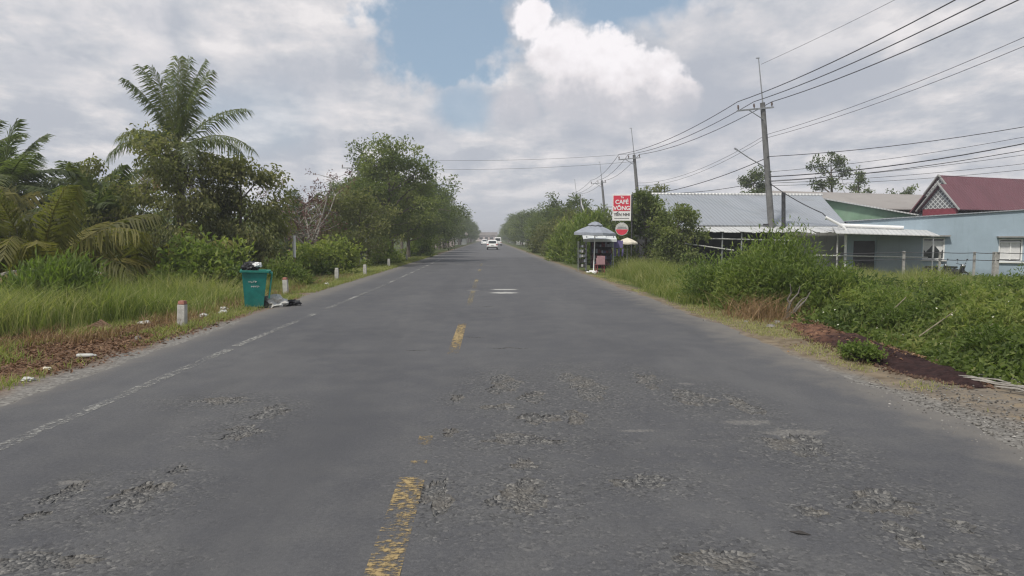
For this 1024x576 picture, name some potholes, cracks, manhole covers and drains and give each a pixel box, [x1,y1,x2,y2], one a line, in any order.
pothole [608,474,673,489]
pothole [761,433,831,458]
pothole [415,478,455,517]
pothole [218,424,267,441]
pothole [101,481,177,515]
pothole [18,510,53,522]
pothole [483,477,551,516]
pothole [563,409,589,425]
pothole [0,551,107,575]
pothole [187,396,252,406]
pothole [480,433,568,446]
pothole [557,372,609,402]
